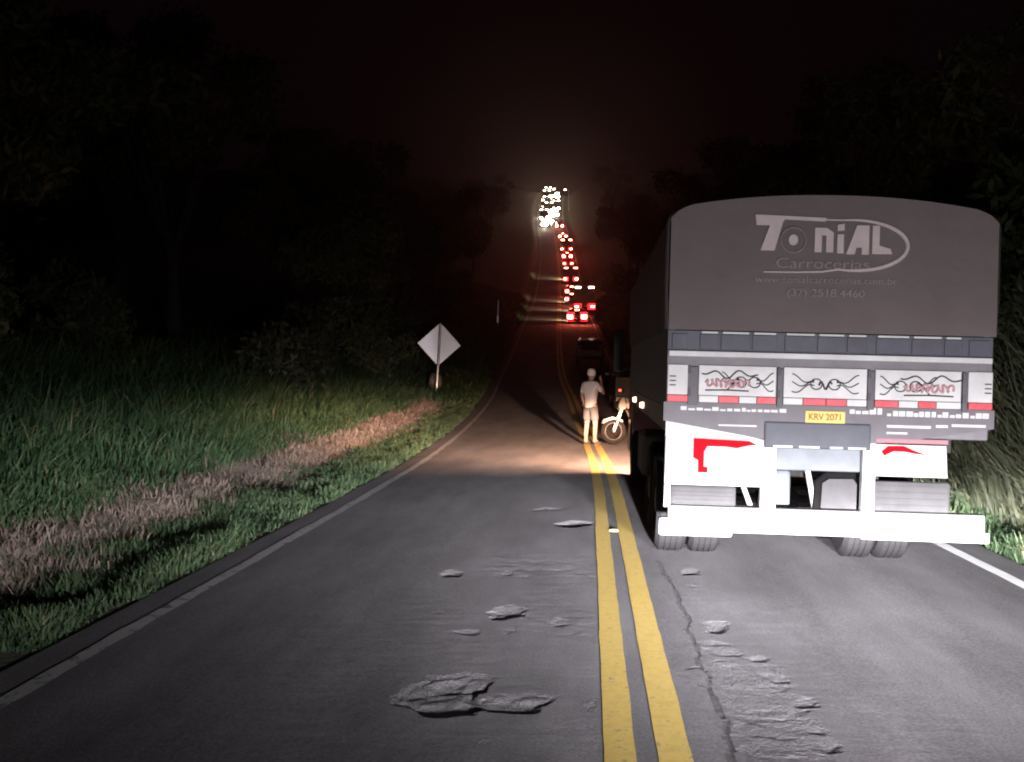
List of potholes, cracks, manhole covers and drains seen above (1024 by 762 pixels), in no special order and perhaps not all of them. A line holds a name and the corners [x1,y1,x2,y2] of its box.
pothole [482,604,530,621]
pothole [545,616,571,628]
pothole [678,568,703,576]
pothole [554,520,595,528]
pothole [699,619,732,635]
pothole [387,672,560,718]
pothole [450,628,483,636]
pothole [438,568,468,578]
crack [655,560,737,762]
